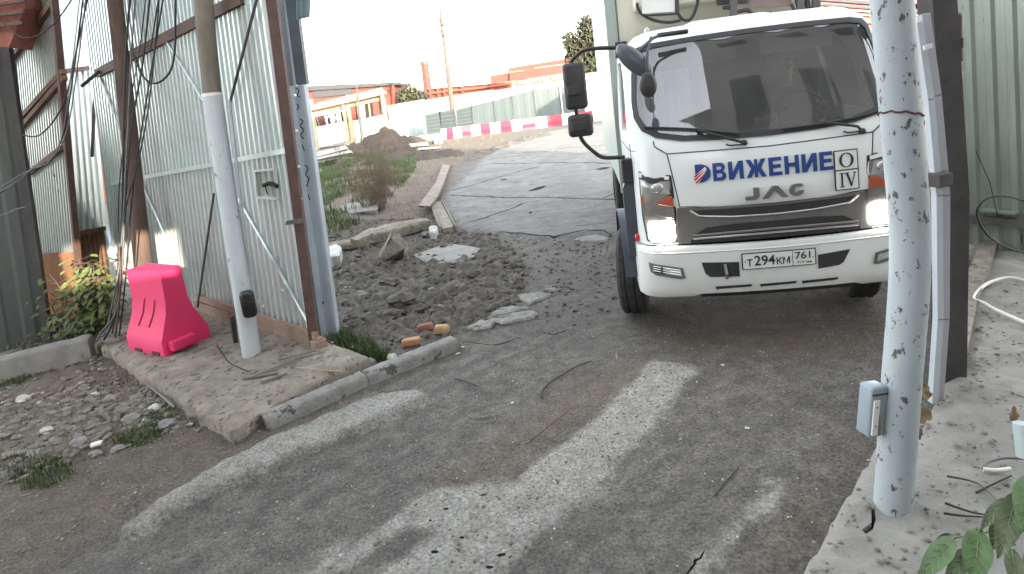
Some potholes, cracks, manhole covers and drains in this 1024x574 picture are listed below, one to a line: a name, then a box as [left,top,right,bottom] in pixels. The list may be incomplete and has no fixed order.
crack [686,550,705,574]
crack [451,145,615,239]
